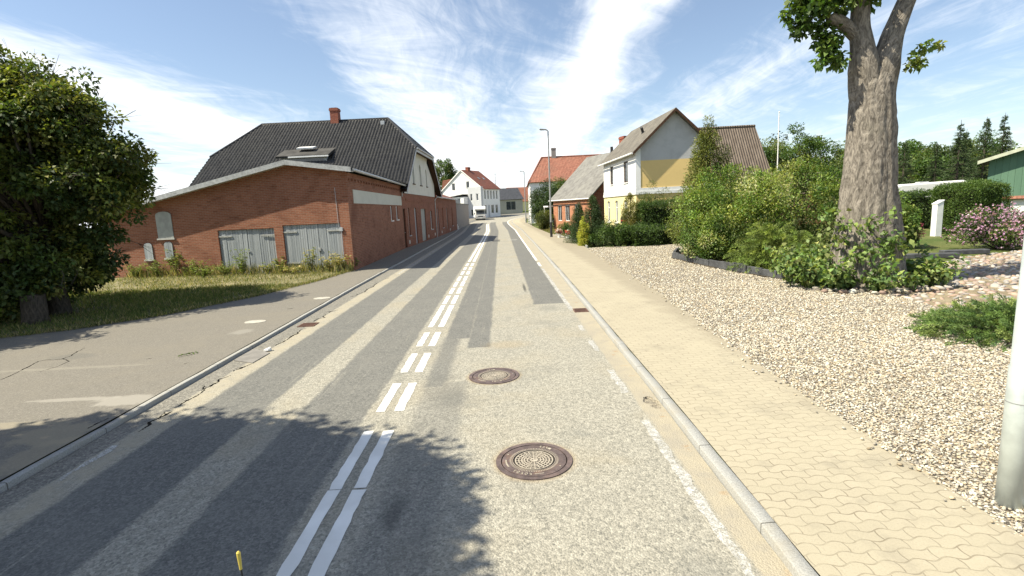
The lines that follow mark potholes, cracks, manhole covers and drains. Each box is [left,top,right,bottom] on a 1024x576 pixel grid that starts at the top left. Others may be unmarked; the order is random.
crack [3,348,84,379]
pothole [643,396,661,409]
manhole cover [496,442,572,481]
crack [138,365,248,432]
manhole cover [469,368,519,384]
